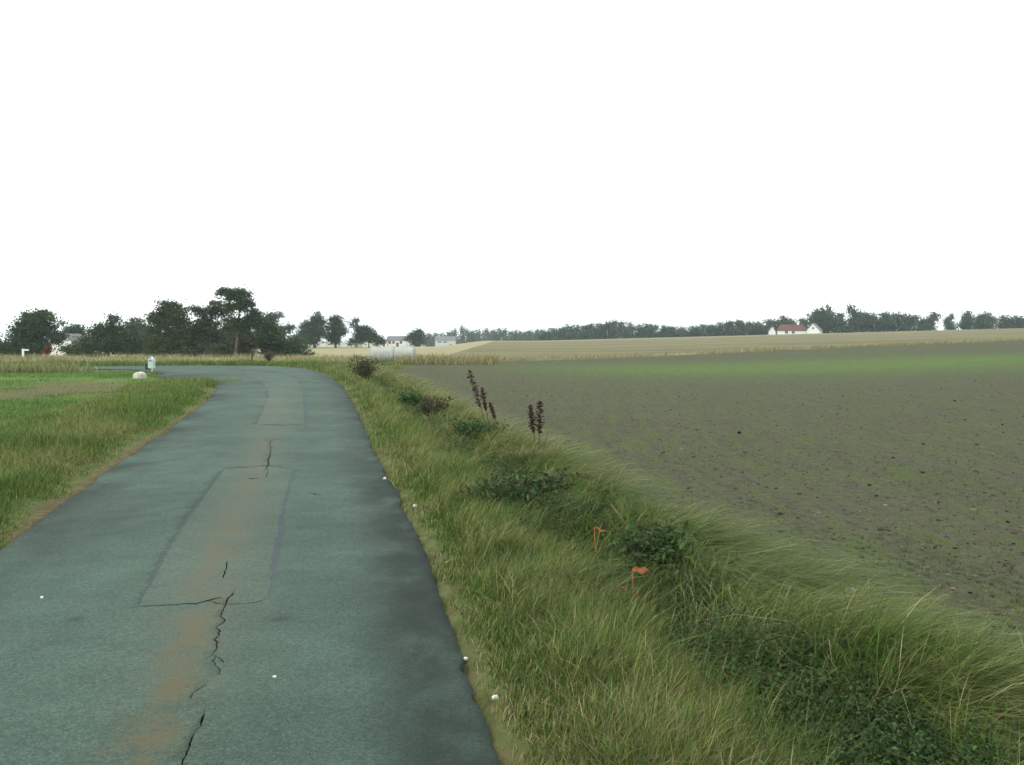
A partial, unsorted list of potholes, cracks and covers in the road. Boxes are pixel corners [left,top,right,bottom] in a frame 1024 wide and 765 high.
crack [136,561,262,696]
